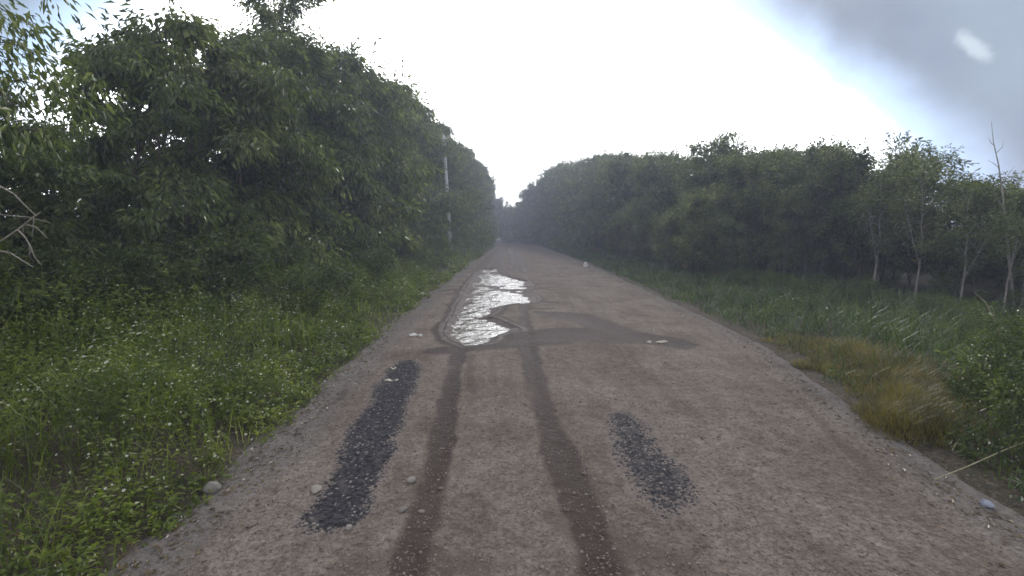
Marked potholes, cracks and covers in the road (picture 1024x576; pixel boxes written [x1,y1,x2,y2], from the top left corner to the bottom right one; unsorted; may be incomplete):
pothole [438,268,542,348]
